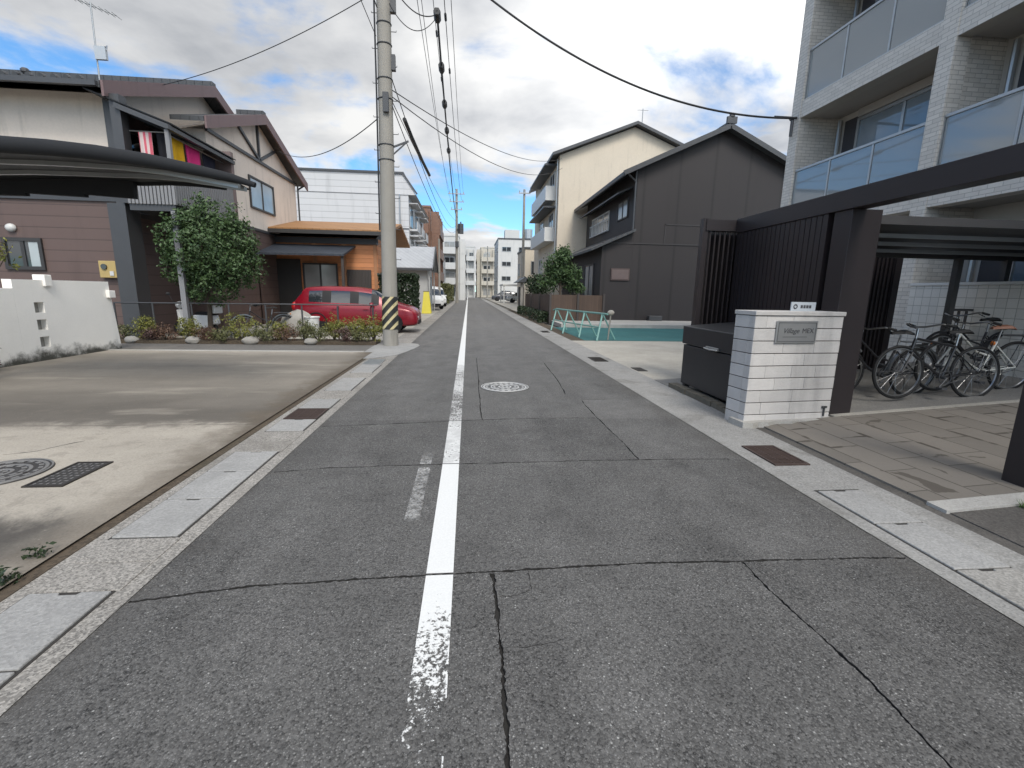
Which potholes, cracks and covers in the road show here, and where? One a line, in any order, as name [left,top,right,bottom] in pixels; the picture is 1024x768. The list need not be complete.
drain grate [283,408,329,419]
crack [128,557,905,768]
manhole cover [481,382,529,392]
drain grate [741,445,810,466]
manhole cover [0,458,55,485]
